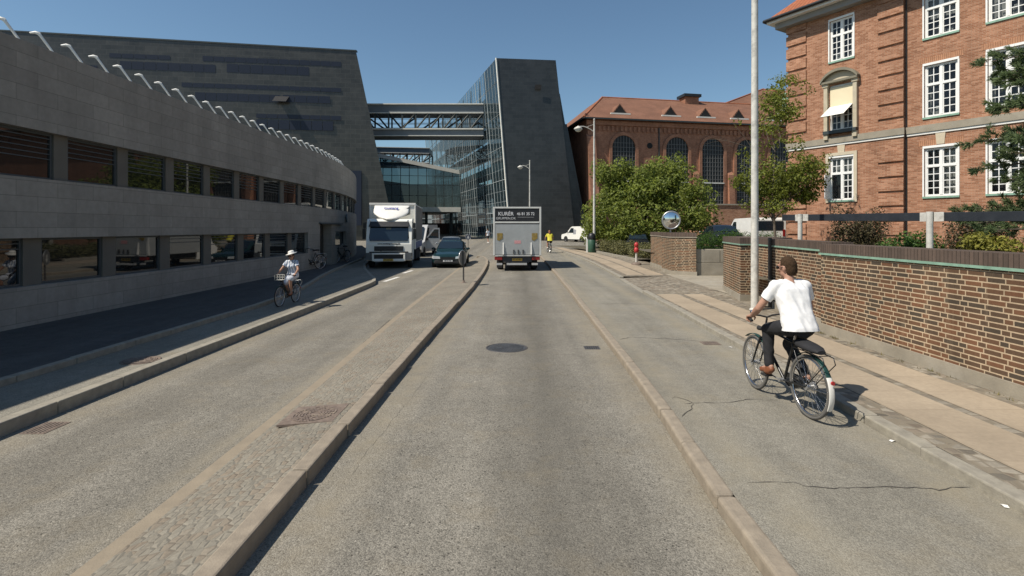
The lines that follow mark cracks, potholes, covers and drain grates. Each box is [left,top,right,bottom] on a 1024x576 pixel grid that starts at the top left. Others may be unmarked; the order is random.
crack [766,481,951,490]
drain grate [19,422,71,434]
manhole cover [486,343,527,353]
manhole cover [276,403,349,428]
